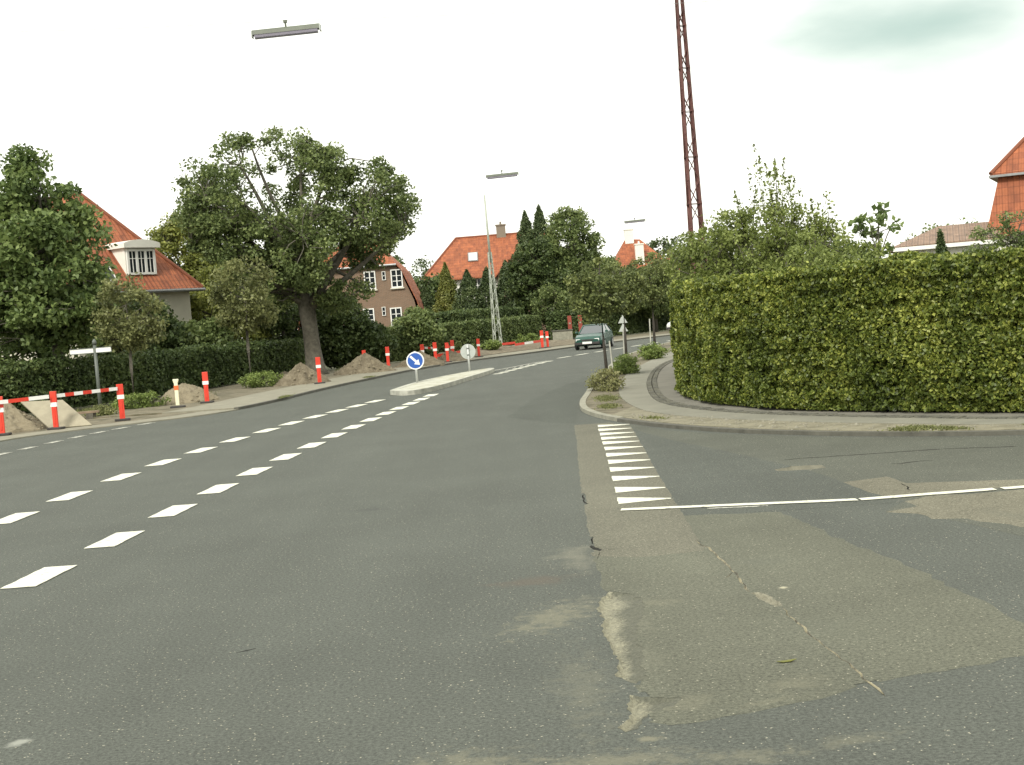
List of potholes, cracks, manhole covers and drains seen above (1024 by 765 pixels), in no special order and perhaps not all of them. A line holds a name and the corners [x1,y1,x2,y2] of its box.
crack [697,541,885,696]
